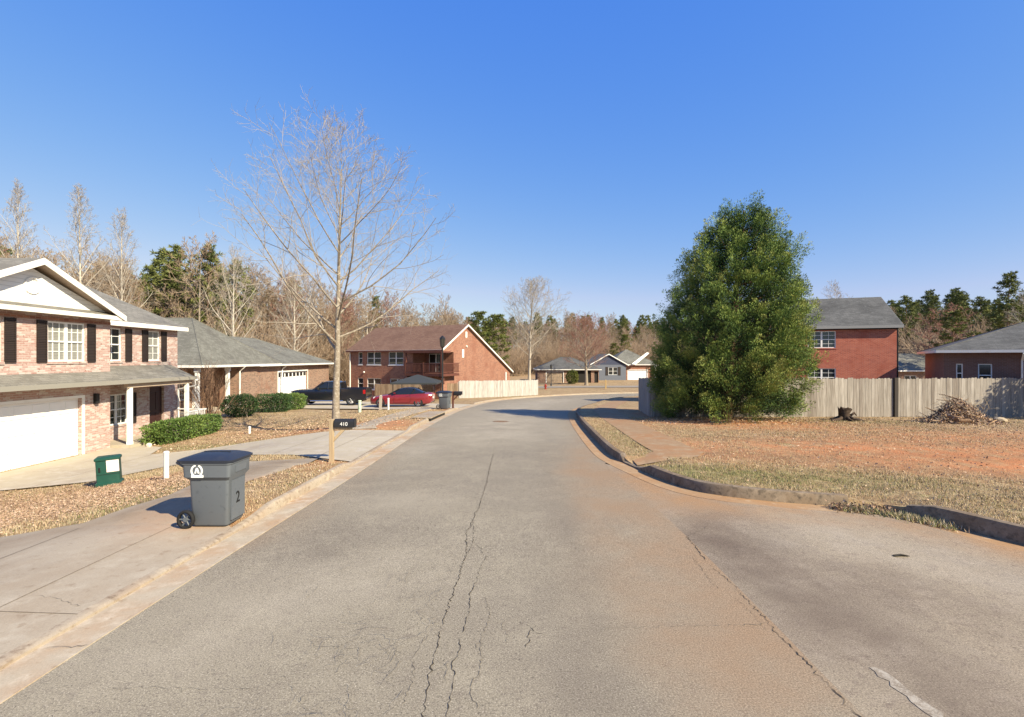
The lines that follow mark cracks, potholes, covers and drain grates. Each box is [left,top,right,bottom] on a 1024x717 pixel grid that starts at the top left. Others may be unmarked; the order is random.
crack [202,454,542,717]
